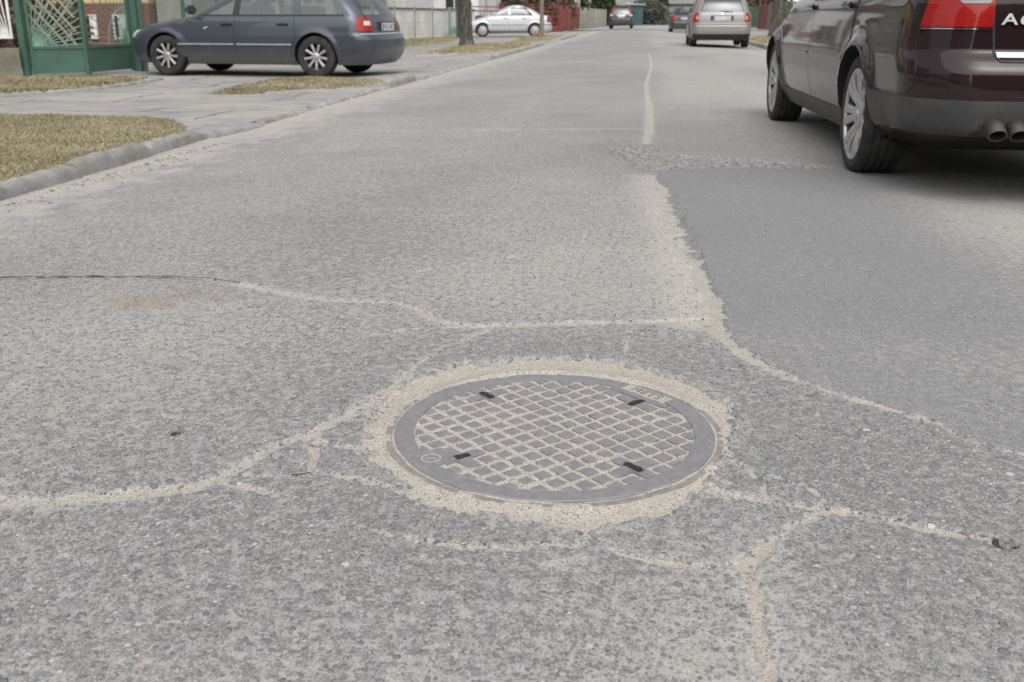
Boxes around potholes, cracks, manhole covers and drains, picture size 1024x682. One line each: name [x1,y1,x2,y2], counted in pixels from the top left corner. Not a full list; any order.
crack [0,275,717,511]
crack [364,465,992,682]
manhole cover [386,374,724,507]
